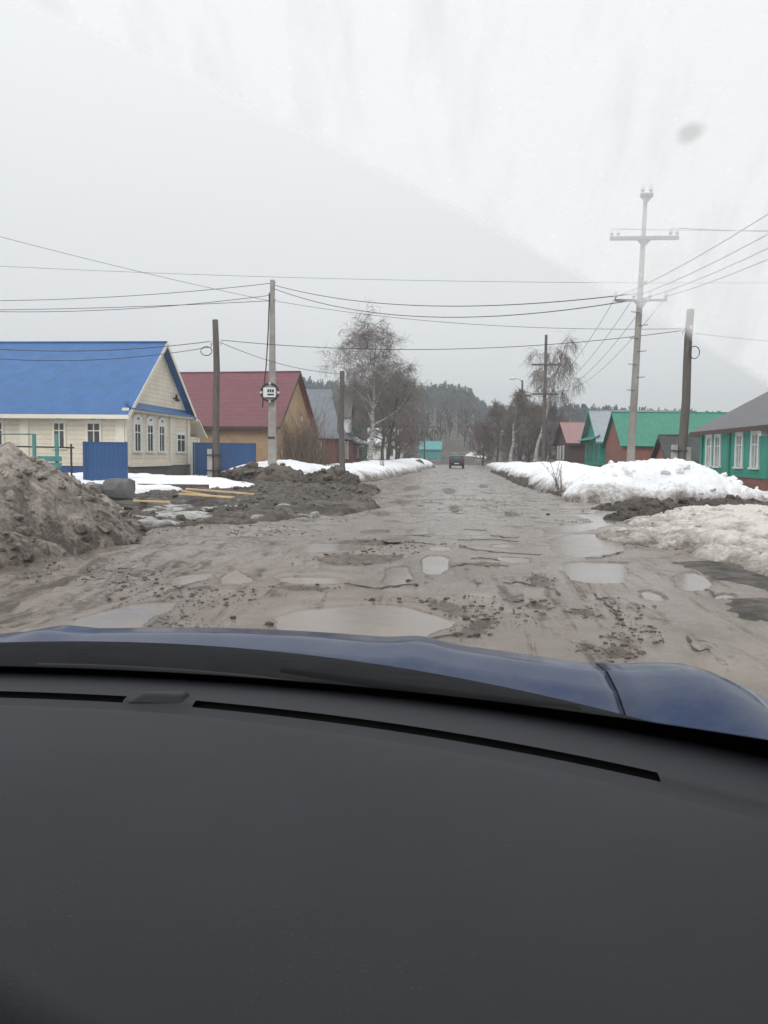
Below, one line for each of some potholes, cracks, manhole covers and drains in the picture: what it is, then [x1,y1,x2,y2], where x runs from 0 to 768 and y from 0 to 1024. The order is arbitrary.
pothole [420,555,450,575]
pothole [380,566,413,586]
pothole [219,569,255,584]
pothole [672,571,713,591]
pothole [72,602,177,628]
pothole [171,573,214,585]
pothole [638,590,669,601]
pothole [273,605,457,637]
pothole [562,561,629,583]
pothole [549,533,626,557]
pothole [290,544,366,553]
